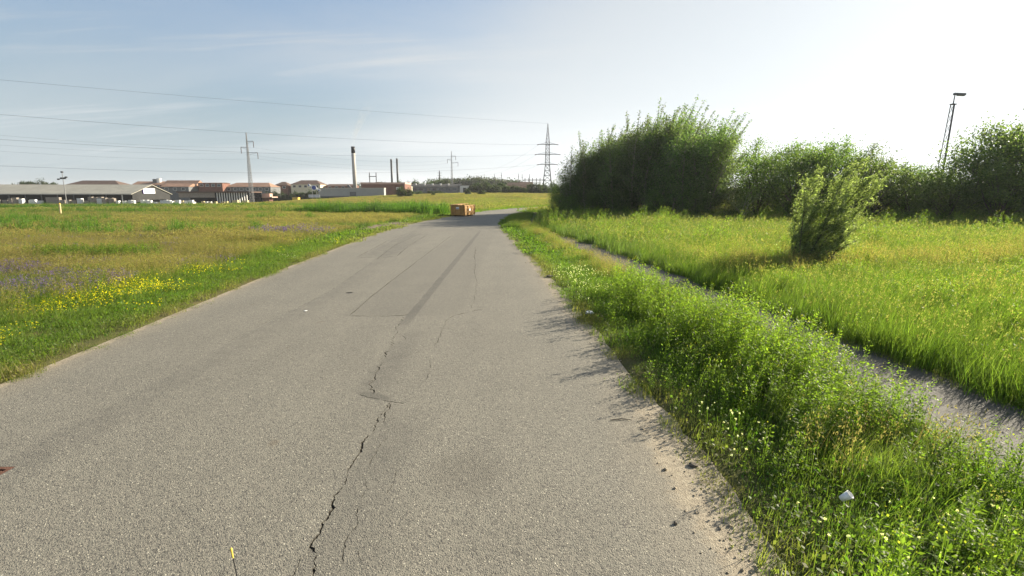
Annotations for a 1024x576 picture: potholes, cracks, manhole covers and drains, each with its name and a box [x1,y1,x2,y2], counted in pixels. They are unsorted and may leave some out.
crack [292,315,406,576]
